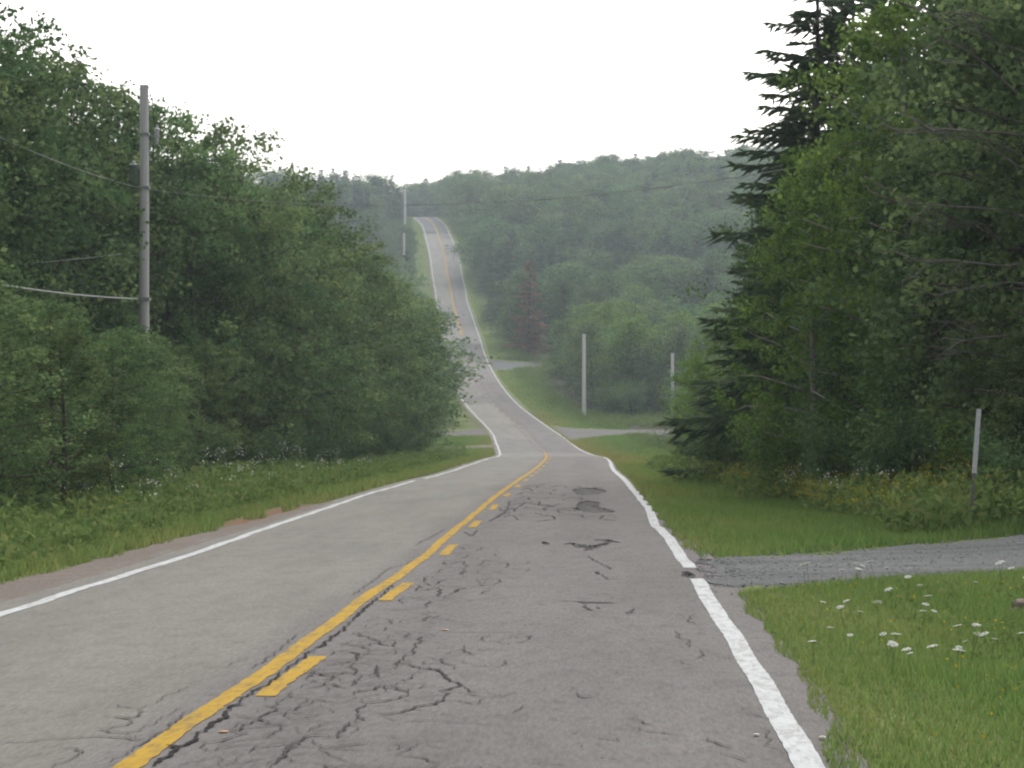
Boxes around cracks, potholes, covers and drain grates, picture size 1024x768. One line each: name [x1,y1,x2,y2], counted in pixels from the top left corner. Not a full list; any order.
crack [180,544,537,768]
pothole [571,501,615,513]
crack [553,599,635,612]
crack [675,614,705,666]
crack [463,483,617,535]
